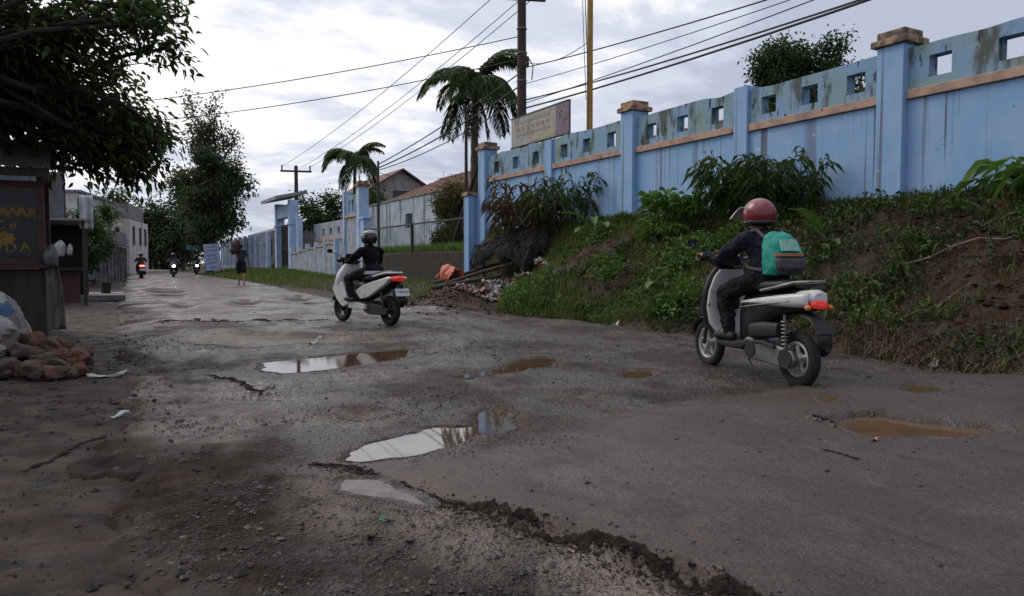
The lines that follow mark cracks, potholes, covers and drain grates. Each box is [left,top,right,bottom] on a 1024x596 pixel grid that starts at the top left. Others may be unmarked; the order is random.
pothole [803,406,1019,439]
crack [20,433,108,472]
pothole [337,404,520,464]
crack [206,374,266,395]
pothole [220,298,270,307]
pothole [137,287,199,297]
pothole [441,356,563,380]
pothole [254,347,442,375]
pothole [889,380,954,394]
pothole [611,368,666,379]
pothole [327,475,442,510]
